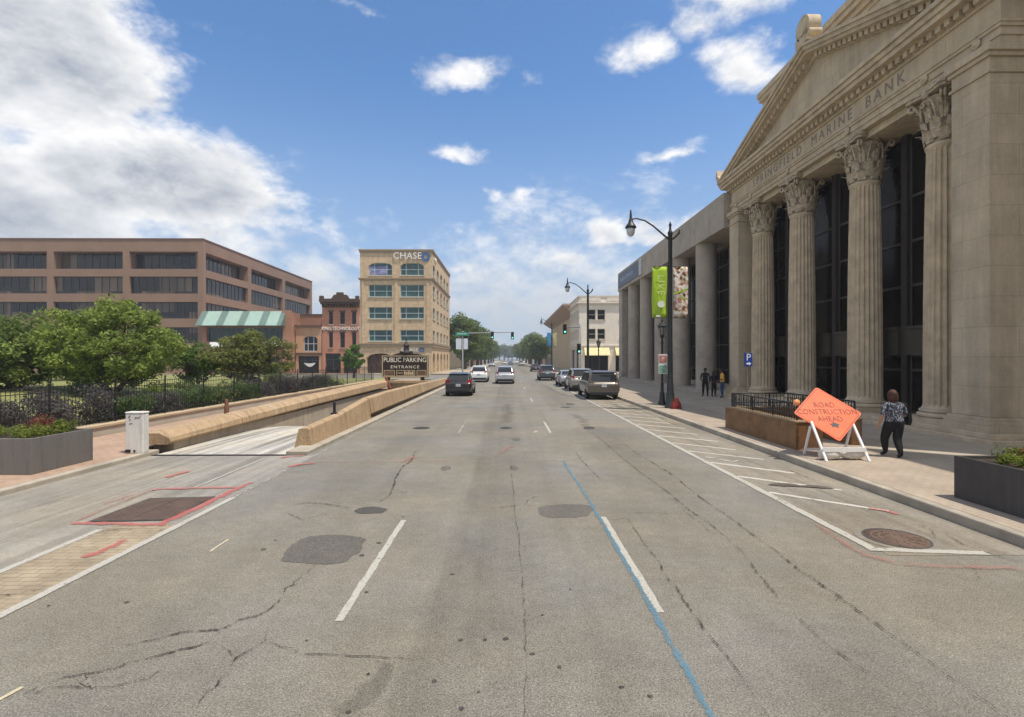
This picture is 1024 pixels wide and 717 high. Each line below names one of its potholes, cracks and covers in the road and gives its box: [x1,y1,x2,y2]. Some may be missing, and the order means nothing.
crack [26,565,403,701]
crack [593,432,1007,717]
manhole cover [853,526,943,550]
